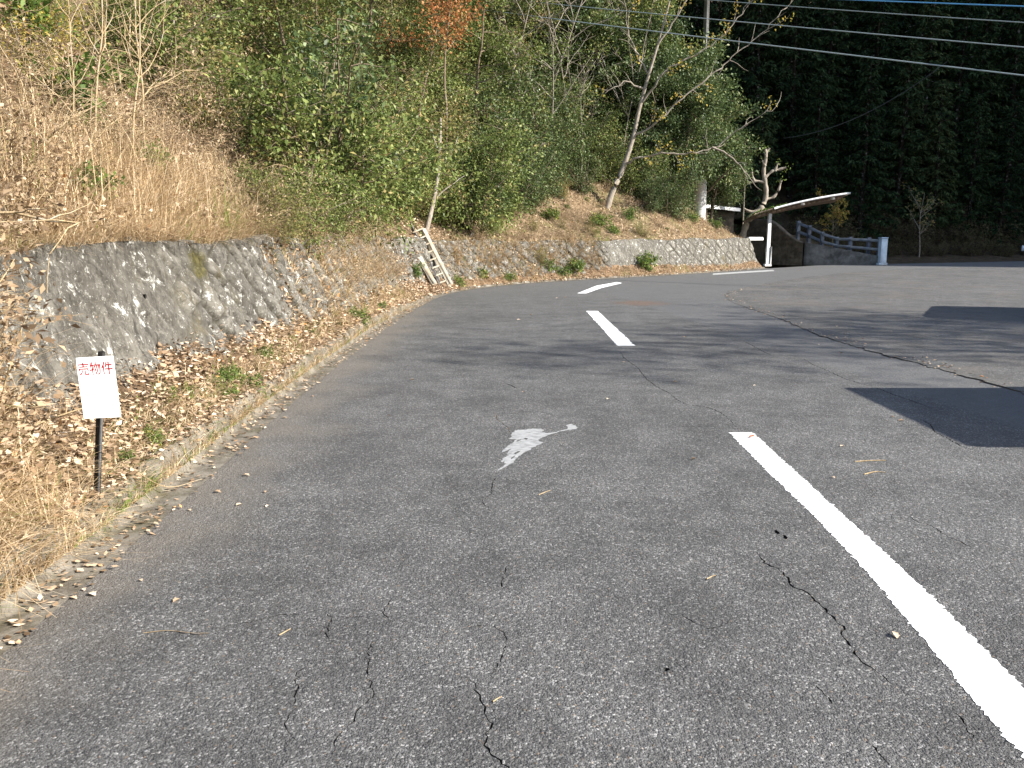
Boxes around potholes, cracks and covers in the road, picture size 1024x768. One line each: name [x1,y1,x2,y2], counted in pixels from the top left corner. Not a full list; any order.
crack [756,545,909,695]
crack [466,620,509,768]
crack [331,600,391,762]
crack [284,657,313,735]
